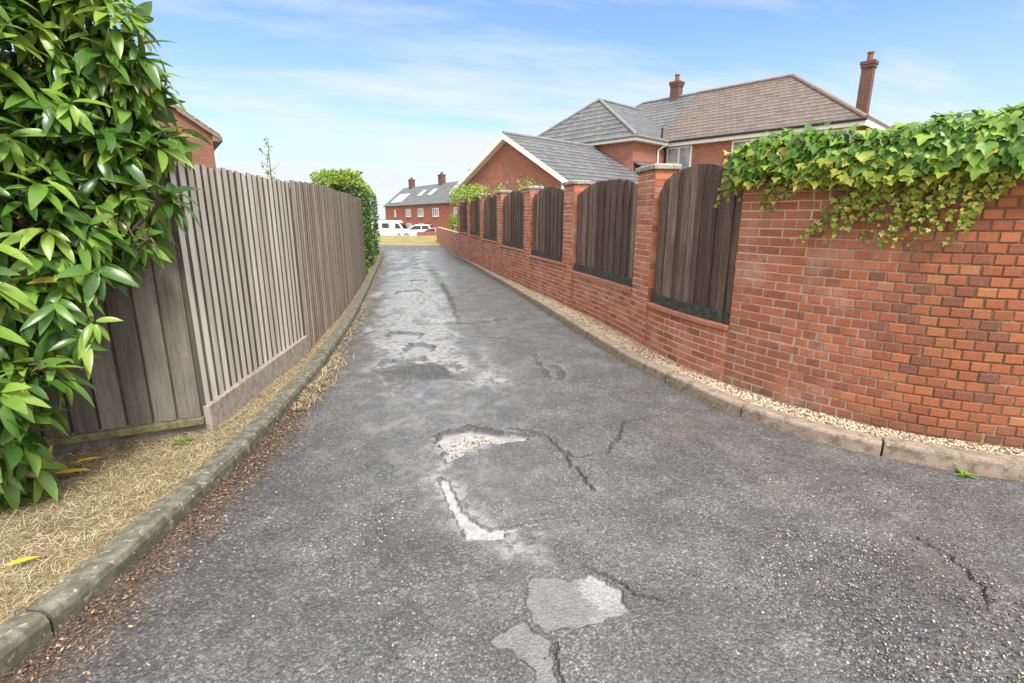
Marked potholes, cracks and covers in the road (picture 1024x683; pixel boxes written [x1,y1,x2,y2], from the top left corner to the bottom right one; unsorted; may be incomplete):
pothole [433,424,542,463]
pothole [377,356,431,368]
pothole [385,331,425,340]
pothole [524,571,631,635]
crack [578,564,664,602]
crack [914,534,992,606]
pothole [402,342,436,354]
pothole [435,477,546,541]
pothole [487,619,559,683]
crack [507,413,658,491]
